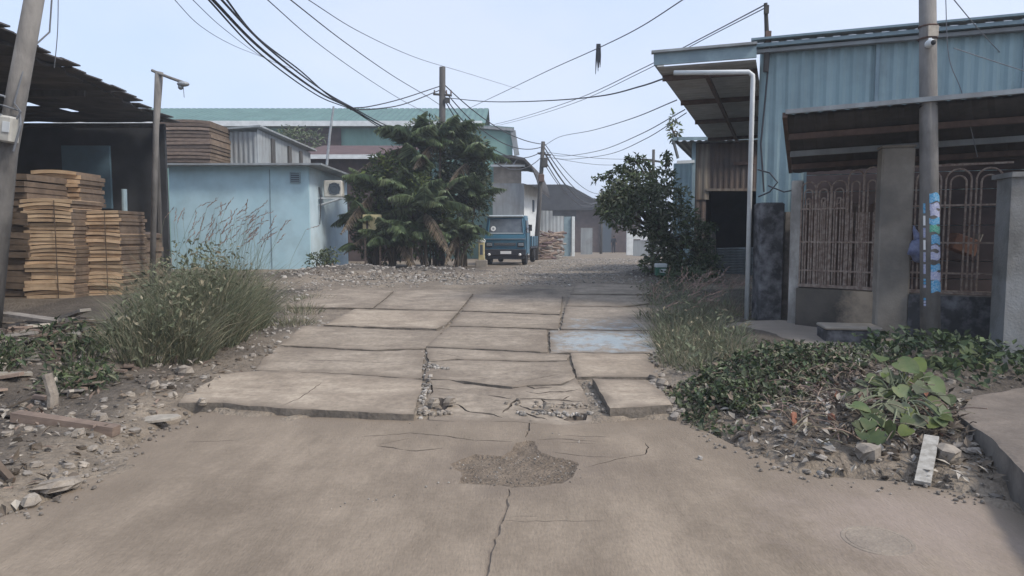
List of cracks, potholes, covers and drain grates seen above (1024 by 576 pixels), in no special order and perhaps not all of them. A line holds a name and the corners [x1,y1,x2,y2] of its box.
pothole [450,441,579,488]
crack [363,353,649,467]
manhole cover [840,526,917,556]
pothole [565,413,587,423]
